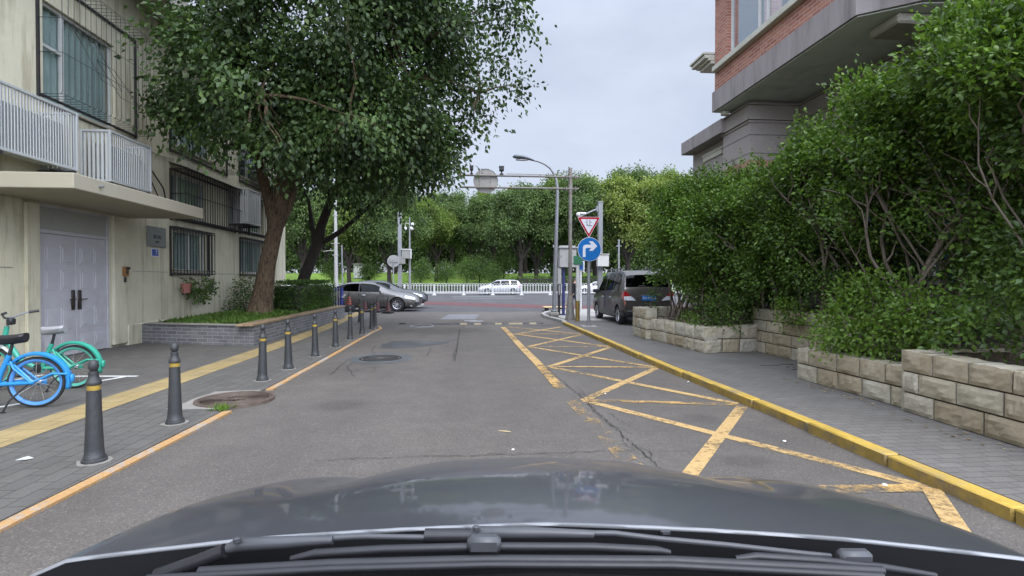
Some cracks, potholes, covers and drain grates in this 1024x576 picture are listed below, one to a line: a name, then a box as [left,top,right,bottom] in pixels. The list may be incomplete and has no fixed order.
manhole cover [193,391,275,409]
